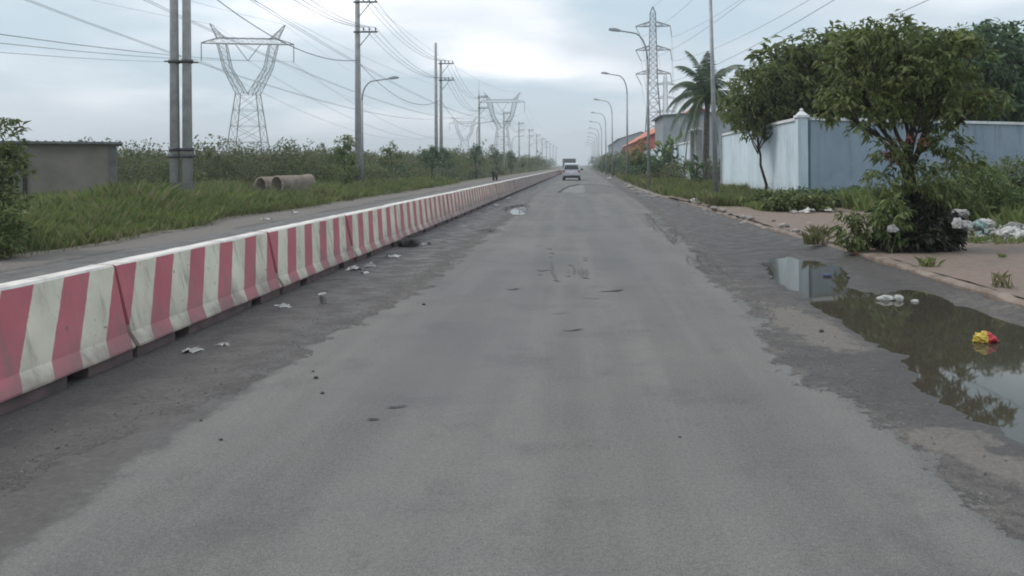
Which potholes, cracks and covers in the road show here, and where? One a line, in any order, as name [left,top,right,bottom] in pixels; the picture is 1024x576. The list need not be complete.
pothole [499,204,534,216]
crack [539,248,623,292]
